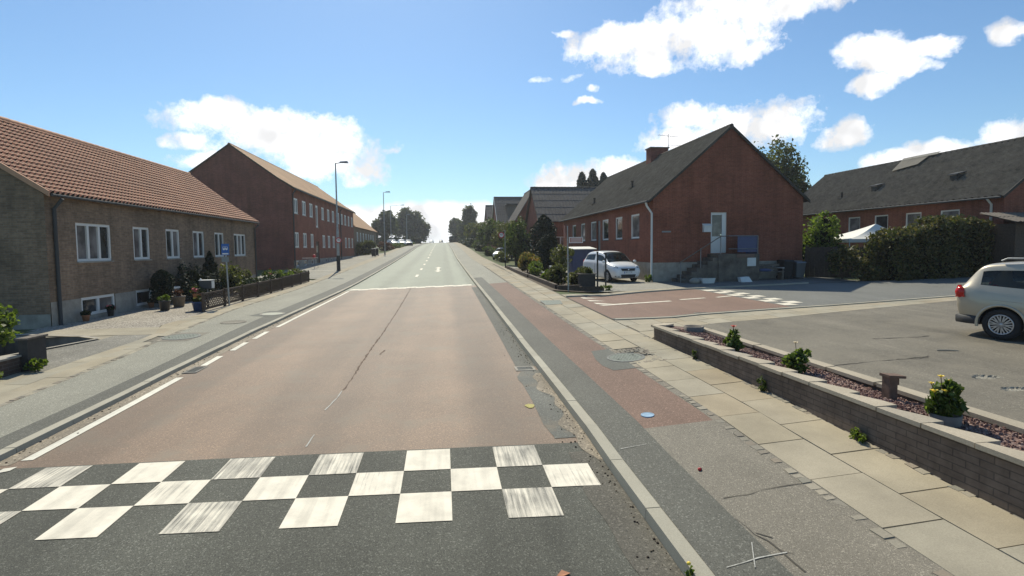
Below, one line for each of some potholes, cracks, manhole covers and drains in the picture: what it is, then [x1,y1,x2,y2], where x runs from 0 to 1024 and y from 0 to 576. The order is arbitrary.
manhole cover [607,353,645,362]
crack [735,518,806,572]
drain grate [182,366,208,374]
